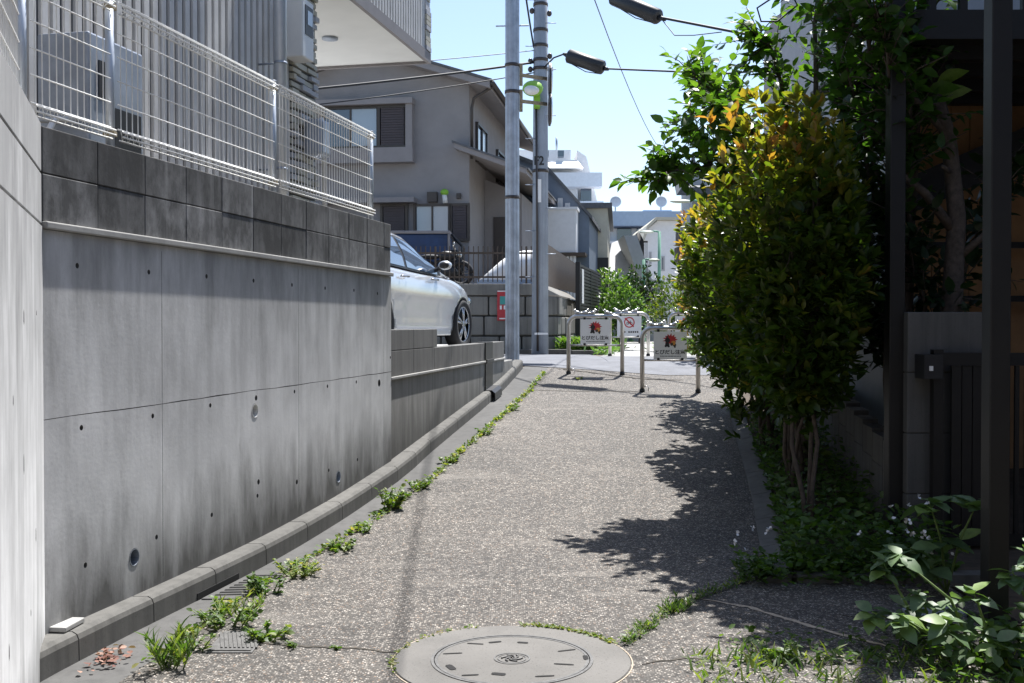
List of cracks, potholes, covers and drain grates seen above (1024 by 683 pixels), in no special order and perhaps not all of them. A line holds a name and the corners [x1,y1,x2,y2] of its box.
crack [704,599,896,649]
manhole cover [391,626,633,683]
drain grate [197,573,283,600]
